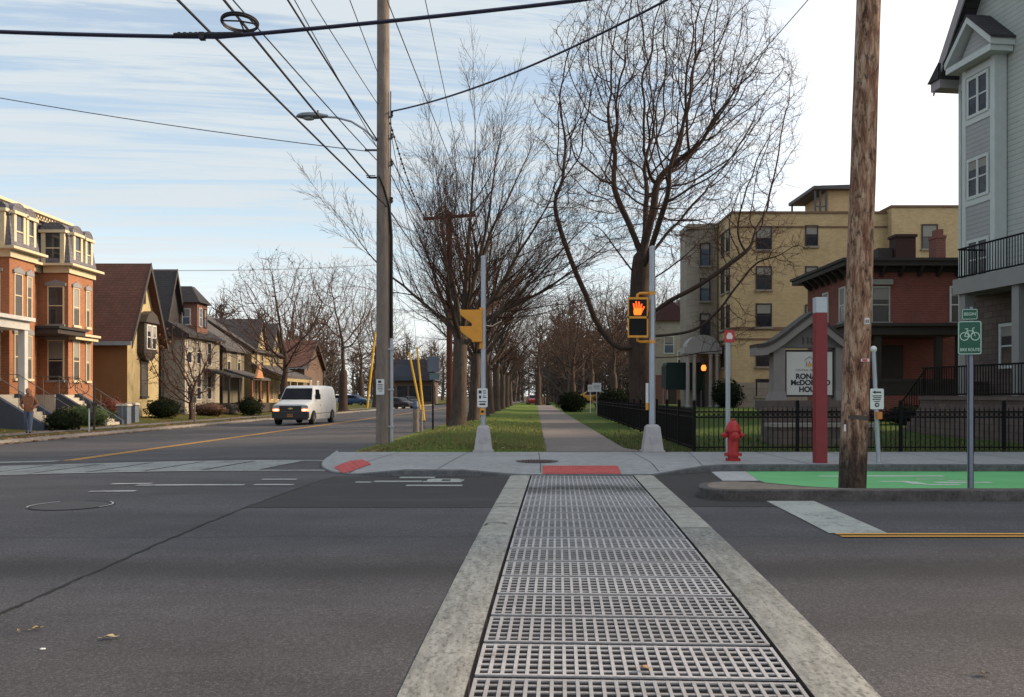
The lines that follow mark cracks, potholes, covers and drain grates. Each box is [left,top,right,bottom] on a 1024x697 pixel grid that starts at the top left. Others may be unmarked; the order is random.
manhole cover [27,500,115,510]
drain grate [506,549,705,563]
drain grate [475,643,796,681]
drain grate [510,538,695,550]
drain grate [469,678,809,697]
drain grate [516,520,678,529]
drain grate [497,576,732,597]
drain grate [502,561,718,578]
drain grate [484,616,770,646]
drain grate [521,506,664,514]
drain grate [513,528,686,539]
drain grate [518,513,671,521]
